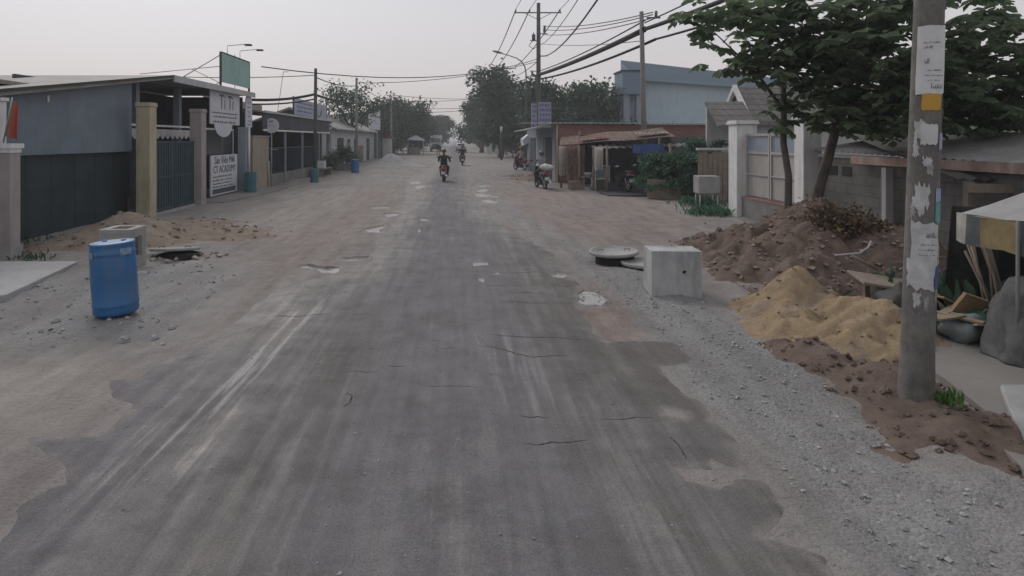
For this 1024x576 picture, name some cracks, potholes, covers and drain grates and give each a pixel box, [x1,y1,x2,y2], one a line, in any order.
crack [478,334,585,358]
pothole [578,290,611,306]
manhole cover [589,246,639,258]
manhole cover [621,257,644,270]
pothole [299,264,341,273]
pothole [362,224,386,233]
